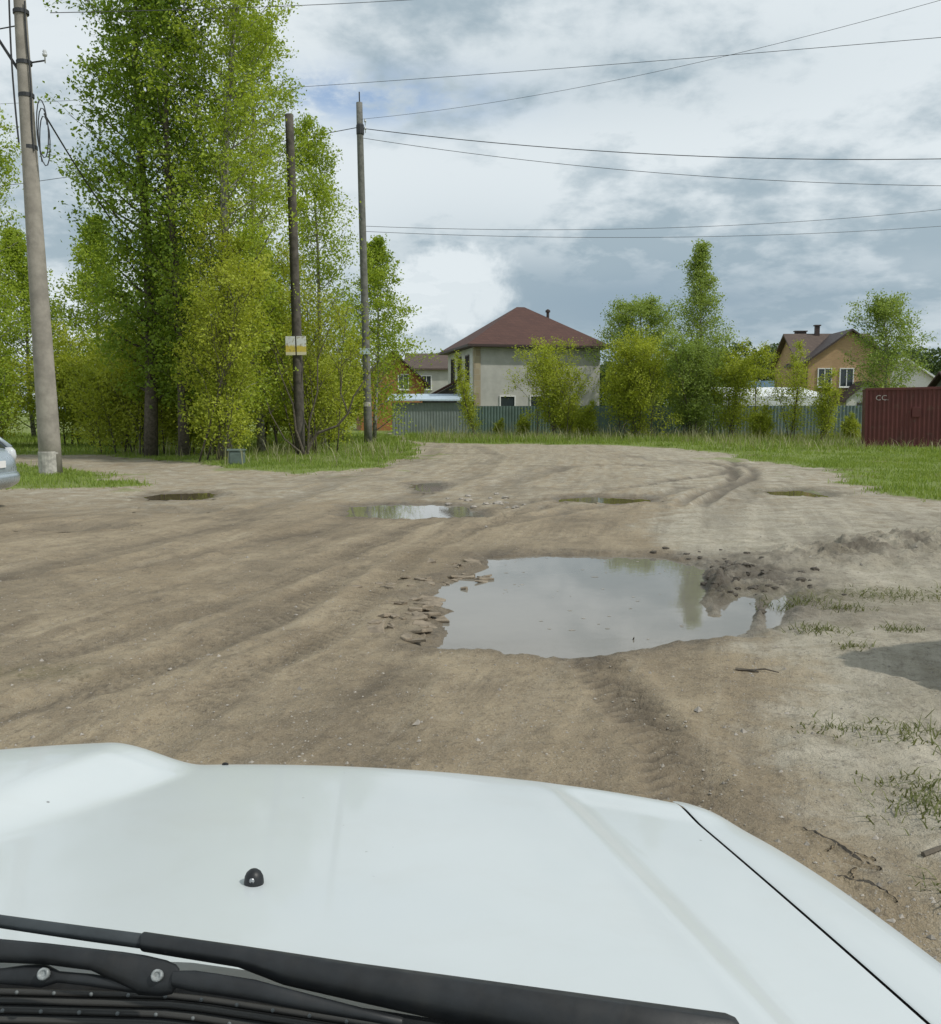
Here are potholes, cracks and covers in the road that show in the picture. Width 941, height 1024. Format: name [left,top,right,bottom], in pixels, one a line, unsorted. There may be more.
pothole [541,492,669,505]
pothole [396,480,455,494]
pothole [127,490,236,501]
pothole [394,548,826,668]
pothole [746,487,850,498]
pothole [327,500,504,520]
